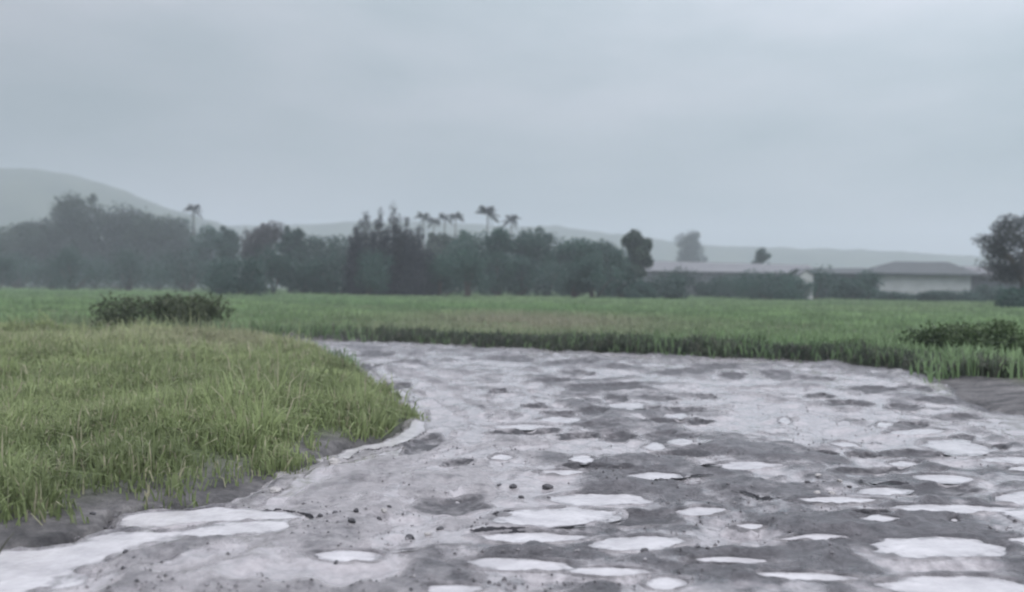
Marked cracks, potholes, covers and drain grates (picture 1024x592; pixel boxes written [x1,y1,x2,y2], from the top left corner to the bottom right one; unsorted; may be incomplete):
pothole [671,503,732,517]
pothole [619,469,692,481]
pothole [781,494,895,506]
pothole [486,452,518,462]
pothole [572,532,702,553]
pothole [532,490,662,507]
pothole [901,472,990,488]
pothole [447,554,588,574]
pothole [477,505,629,529]
pothole [848,533,1024,563]
pothole [565,453,598,468]
